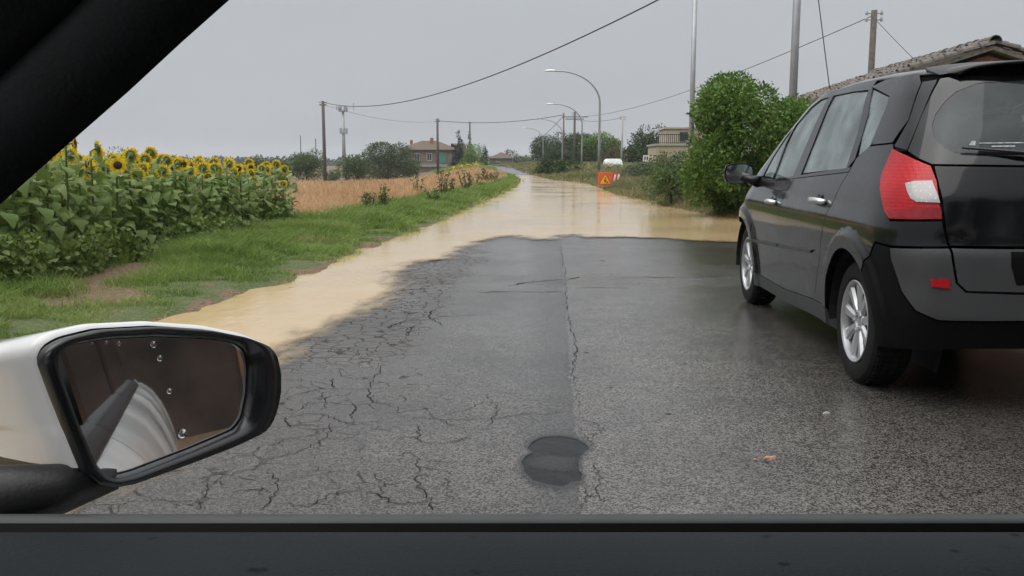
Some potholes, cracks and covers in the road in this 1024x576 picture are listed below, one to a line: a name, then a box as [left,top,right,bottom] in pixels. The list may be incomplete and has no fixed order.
crack [387,309,461,334]
crack [150,348,557,510]
crack [582,418,605,503]
crack [478,277,609,293]
